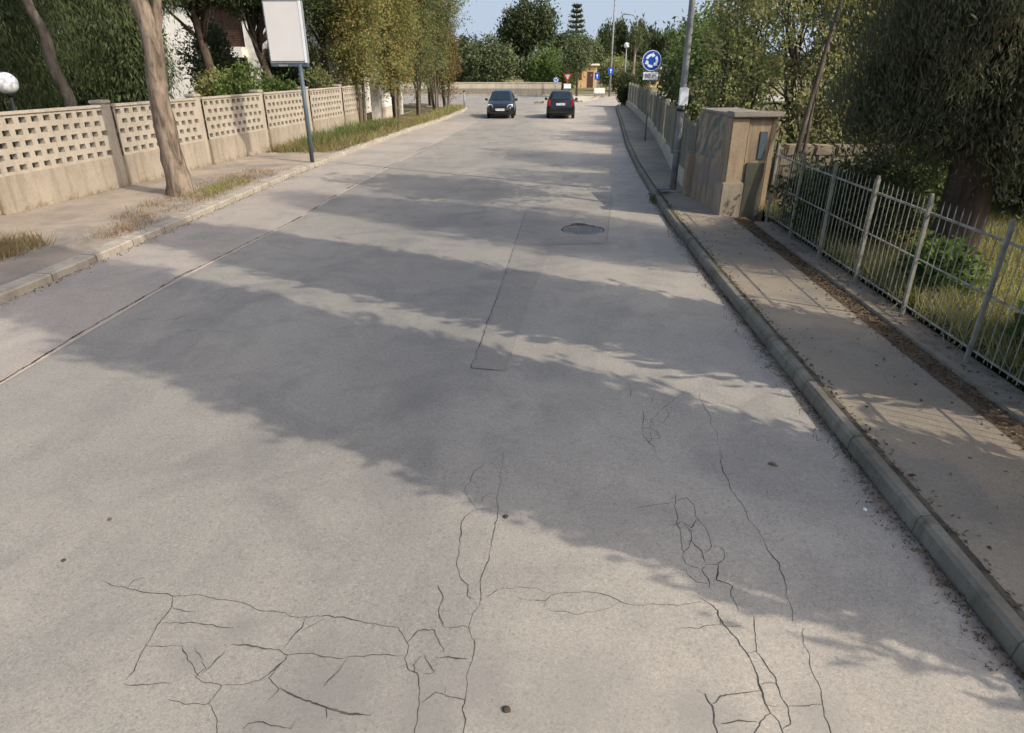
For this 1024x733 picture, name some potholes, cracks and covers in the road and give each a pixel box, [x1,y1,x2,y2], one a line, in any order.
crack [608,385,675,453]
crack [699,395,832,733]
crack [102,466,822,733]
manhole cover [561,223,604,235]
